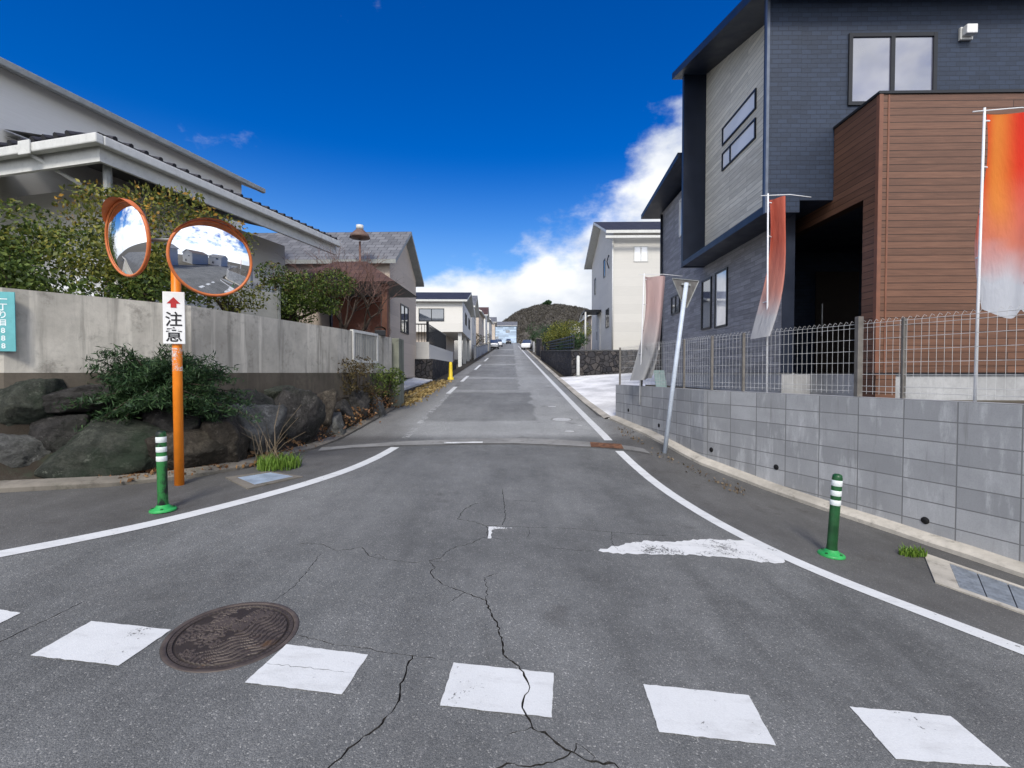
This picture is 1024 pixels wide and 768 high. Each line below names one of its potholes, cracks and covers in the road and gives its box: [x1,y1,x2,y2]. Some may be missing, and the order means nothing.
manhole cover [160,602,299,673]
crack [272,490,666,768]
